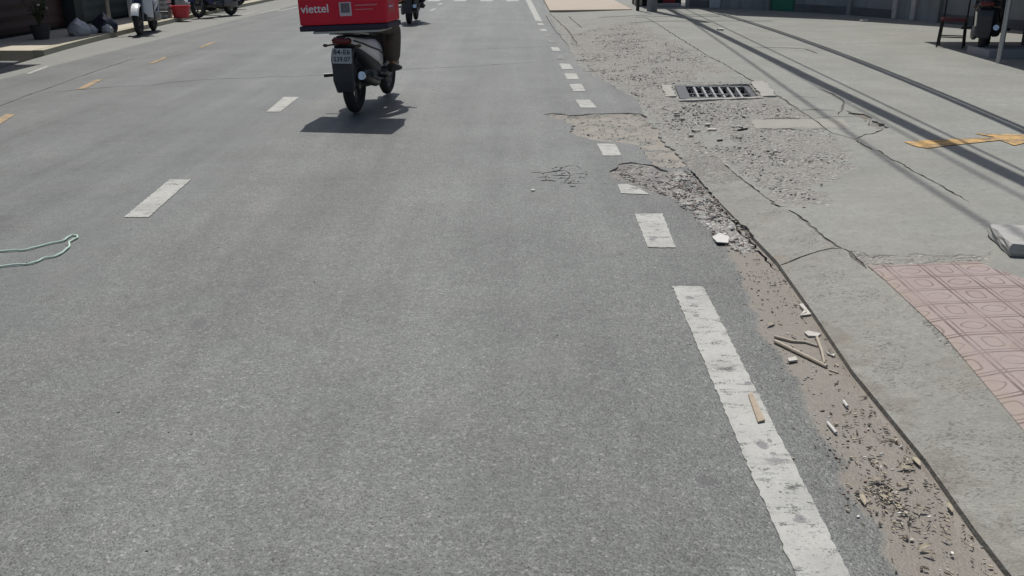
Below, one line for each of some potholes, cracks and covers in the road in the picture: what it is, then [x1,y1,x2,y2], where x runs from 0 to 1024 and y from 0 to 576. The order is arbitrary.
pothole [544,113,687,168]
drain grate [661,81,777,102]
pothole [610,162,670,193]
